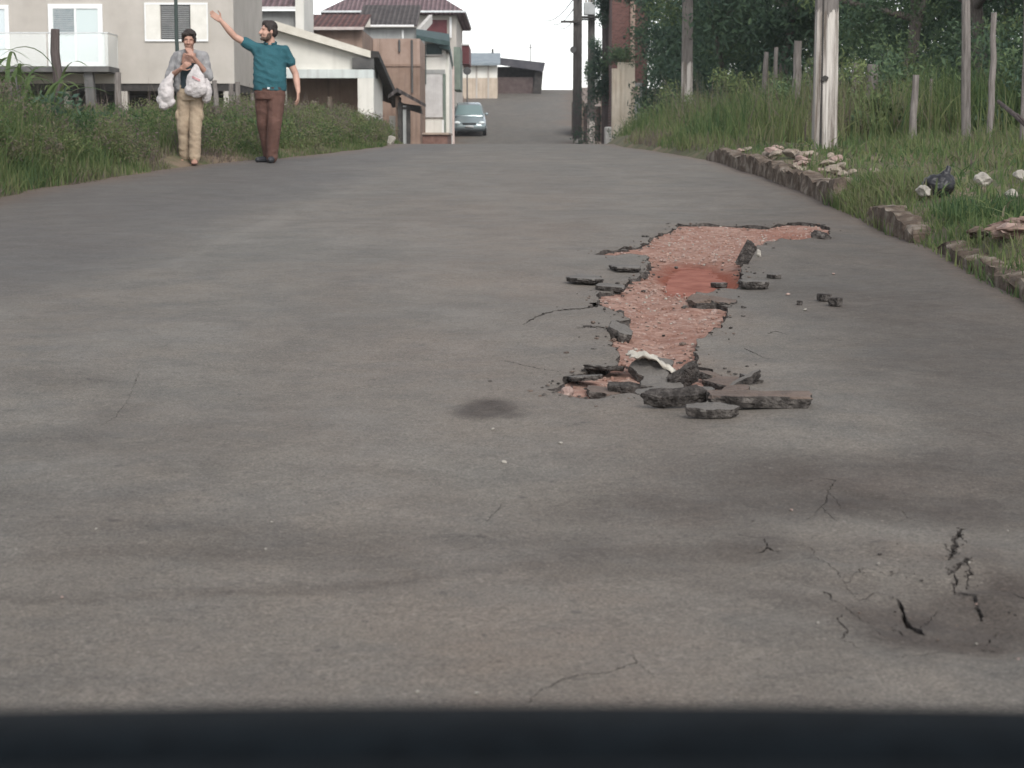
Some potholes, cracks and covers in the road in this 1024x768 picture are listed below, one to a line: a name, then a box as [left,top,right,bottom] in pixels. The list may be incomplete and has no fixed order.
crack [807,546,945,658]
crack [529,653,653,702]
crack [808,478,841,522]
pothole [547,222,831,399]
crack [740,535,779,554]
crack [527,304,603,328]
crack [920,528,1024,653]
